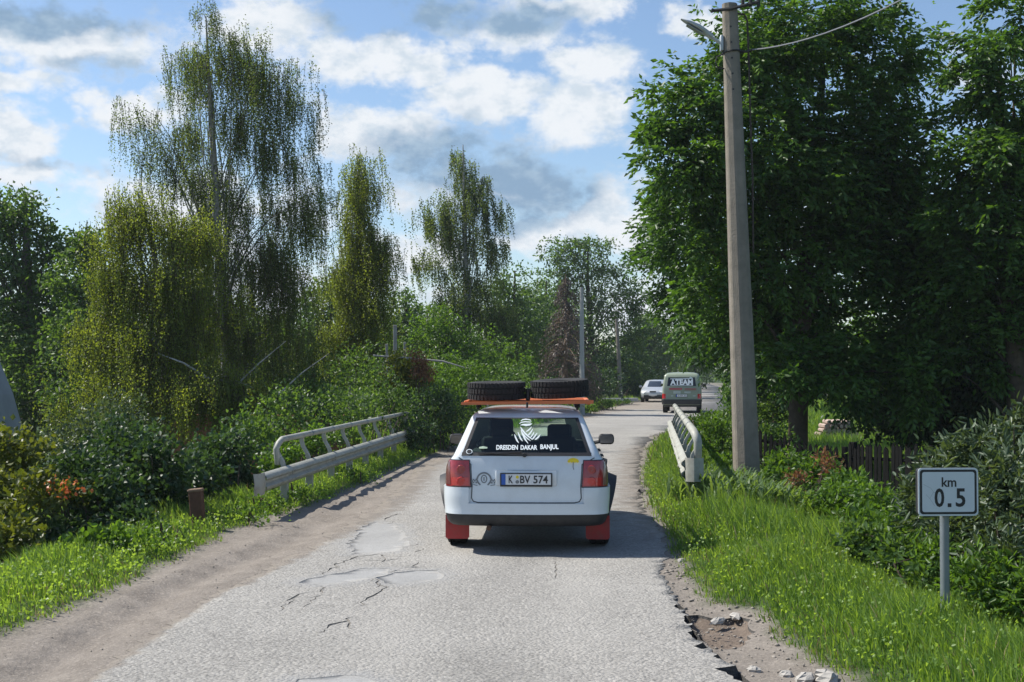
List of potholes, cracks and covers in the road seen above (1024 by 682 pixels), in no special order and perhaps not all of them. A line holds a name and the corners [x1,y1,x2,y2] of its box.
pothole [715,666,749,682]
crack [281,544,421,634]
pothole [688,615,755,650]
